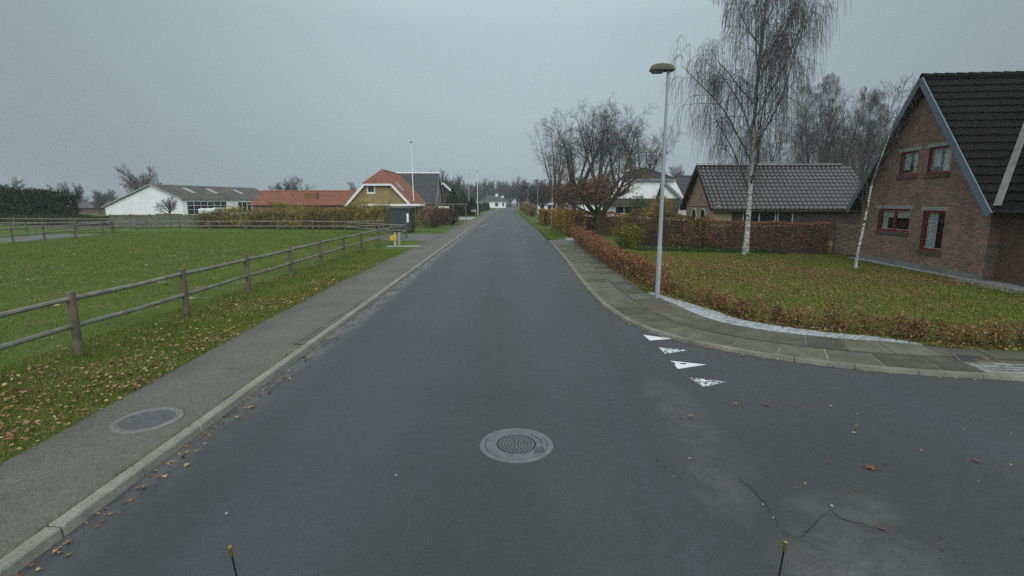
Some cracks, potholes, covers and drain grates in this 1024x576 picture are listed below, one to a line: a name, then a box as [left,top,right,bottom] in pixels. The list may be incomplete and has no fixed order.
utility cover [951,353,1005,366]
manhole cover [480,428,553,463]
manhole cover [109,407,184,434]
crack [739,478,877,538]
